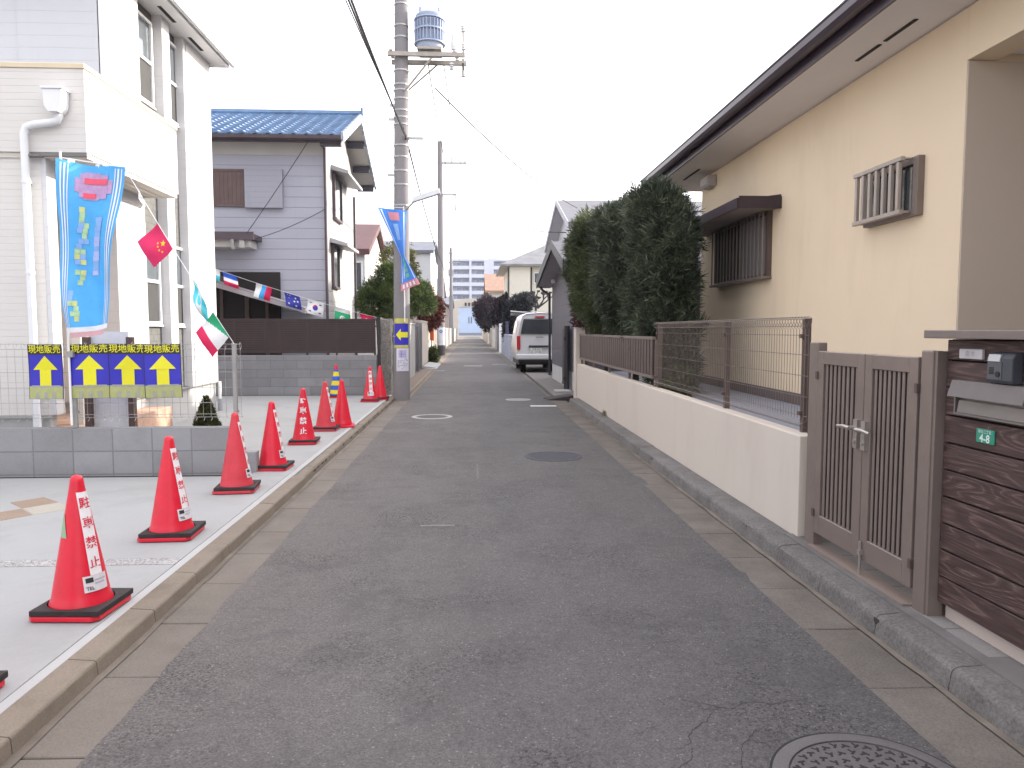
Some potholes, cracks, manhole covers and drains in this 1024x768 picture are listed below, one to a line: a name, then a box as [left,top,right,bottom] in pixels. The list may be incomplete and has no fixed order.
manhole cover [525,451,582,462]
manhole cover [770,732,955,768]
crack [629,700,792,768]
